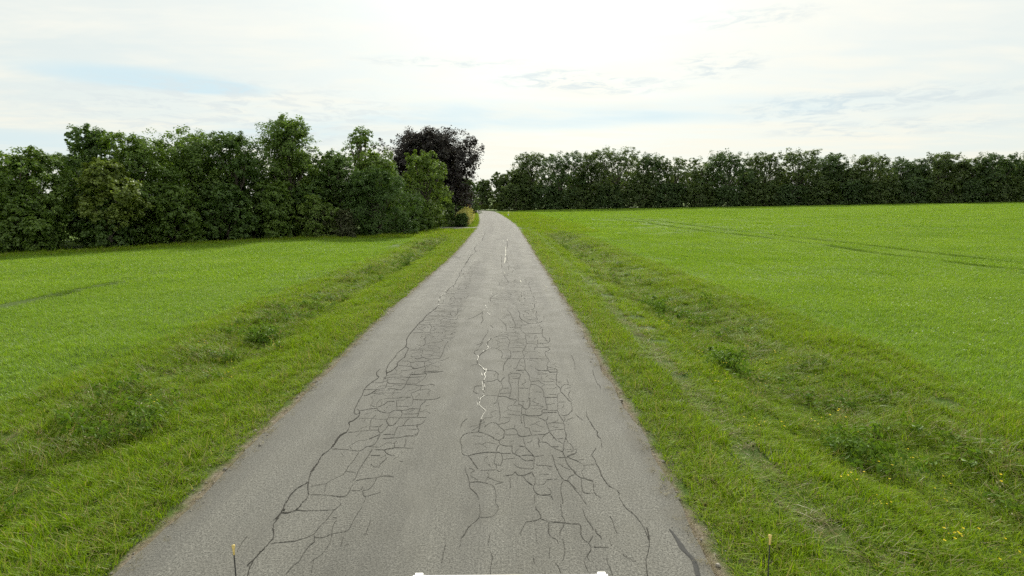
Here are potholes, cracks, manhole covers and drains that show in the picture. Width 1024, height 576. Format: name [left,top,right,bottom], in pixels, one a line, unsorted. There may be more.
crack [441,244,650,575]
crack [237,234,485,575]
